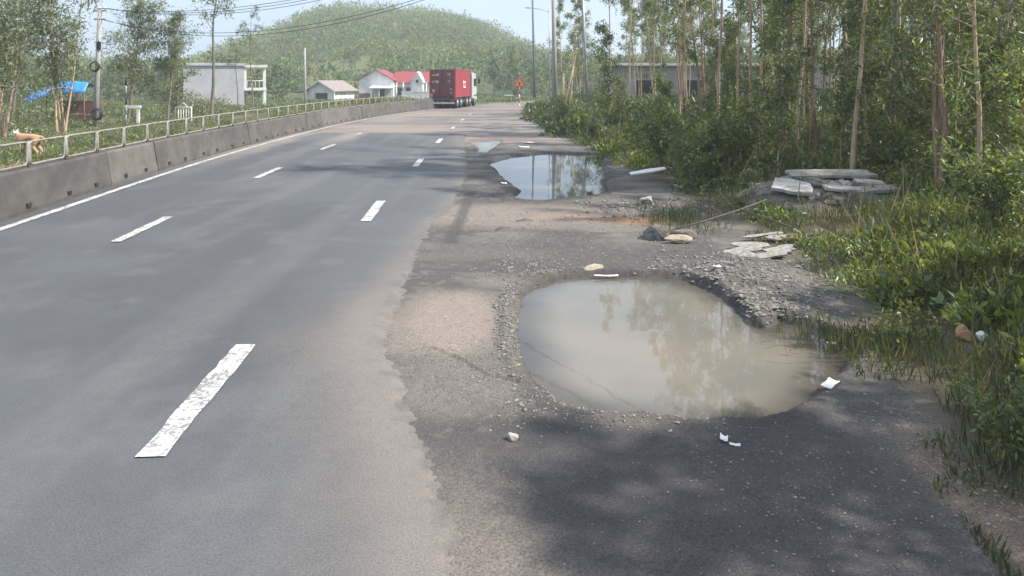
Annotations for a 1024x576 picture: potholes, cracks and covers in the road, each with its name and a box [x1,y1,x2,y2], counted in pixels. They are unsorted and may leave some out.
pothole [467,139,508,154]
crack [407,346,521,384]
pothole [482,151,619,202]
pothole [505,268,868,421]
